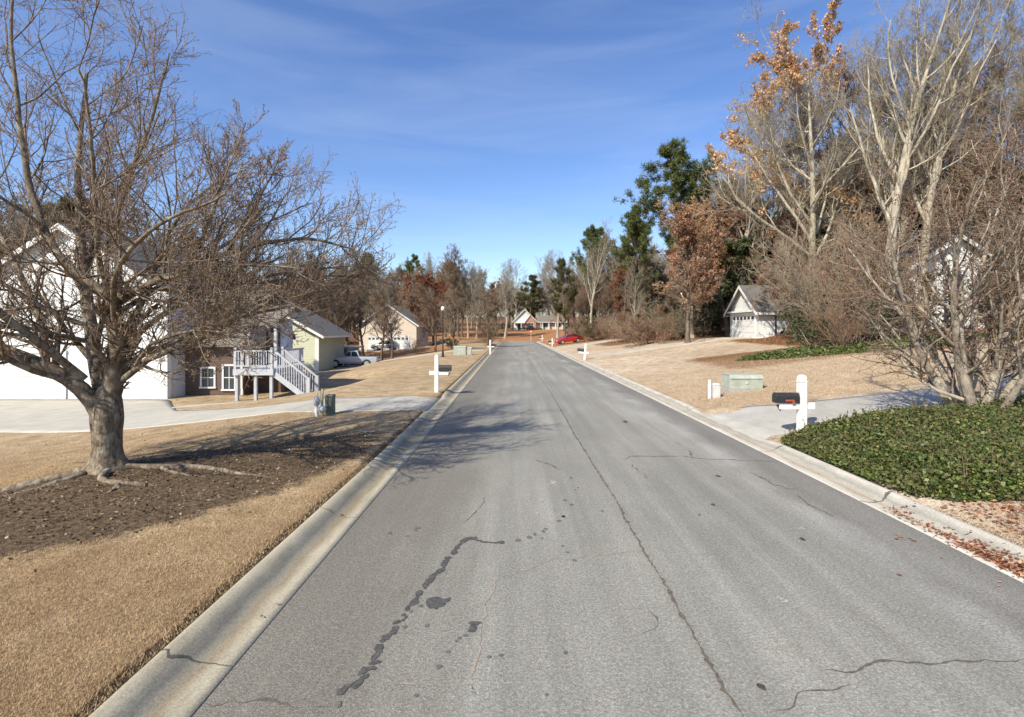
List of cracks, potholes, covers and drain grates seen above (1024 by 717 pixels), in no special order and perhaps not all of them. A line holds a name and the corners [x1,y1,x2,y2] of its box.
crack [770,593,1020,710]
crack [389,550,636,694]
crack [627,442,833,516]
